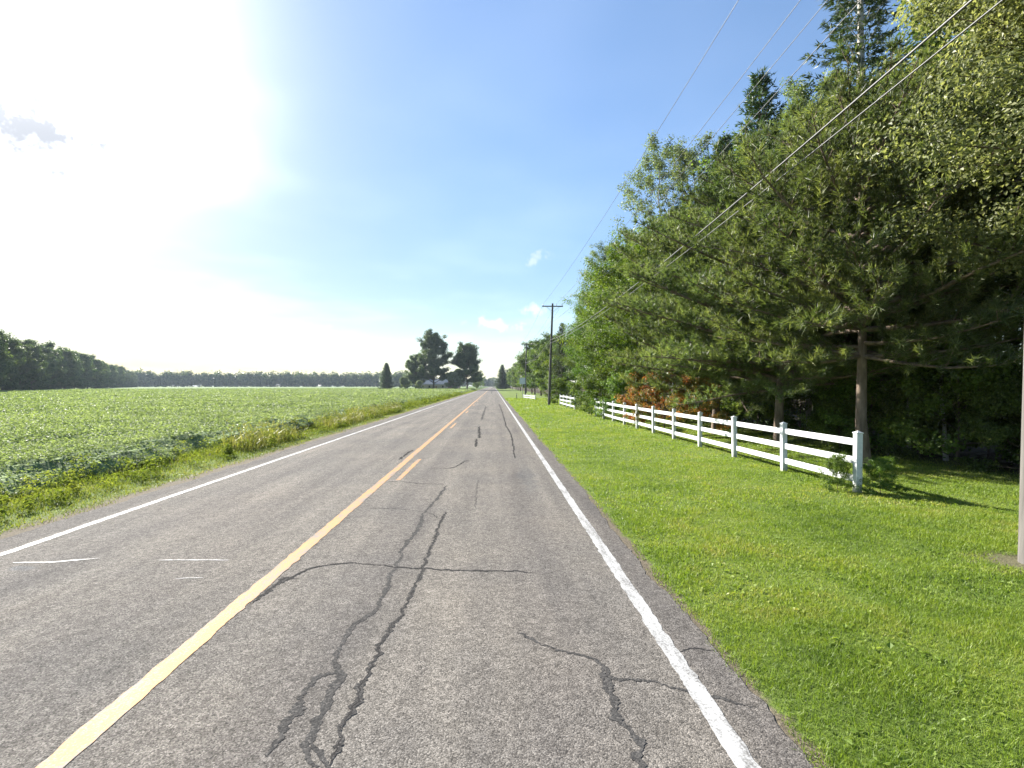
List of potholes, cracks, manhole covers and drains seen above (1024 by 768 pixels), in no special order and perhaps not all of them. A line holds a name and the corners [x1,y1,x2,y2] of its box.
crack [250,404,536,768]
